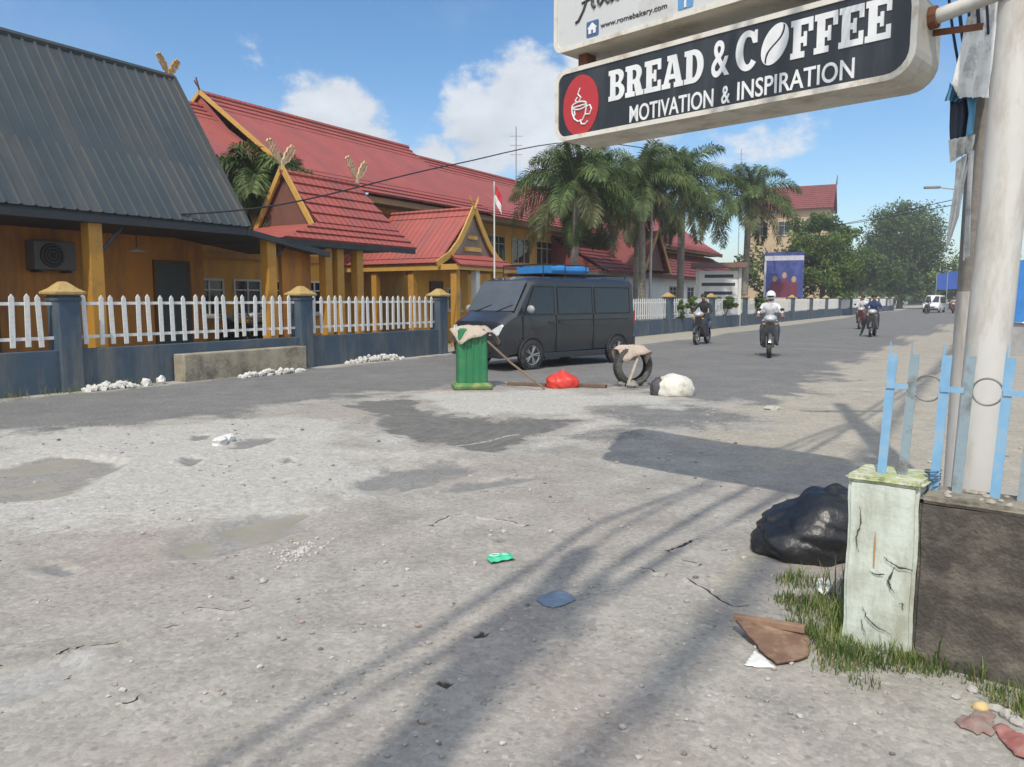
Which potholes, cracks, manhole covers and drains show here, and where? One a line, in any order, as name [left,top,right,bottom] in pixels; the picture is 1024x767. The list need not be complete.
pothole [166,453,213,469]
crack [628,538,754,629]
pothole [142,505,340,564]
crack [429,513,529,527]
crack [54,639,128,655]
pothole [0,452,144,506]
